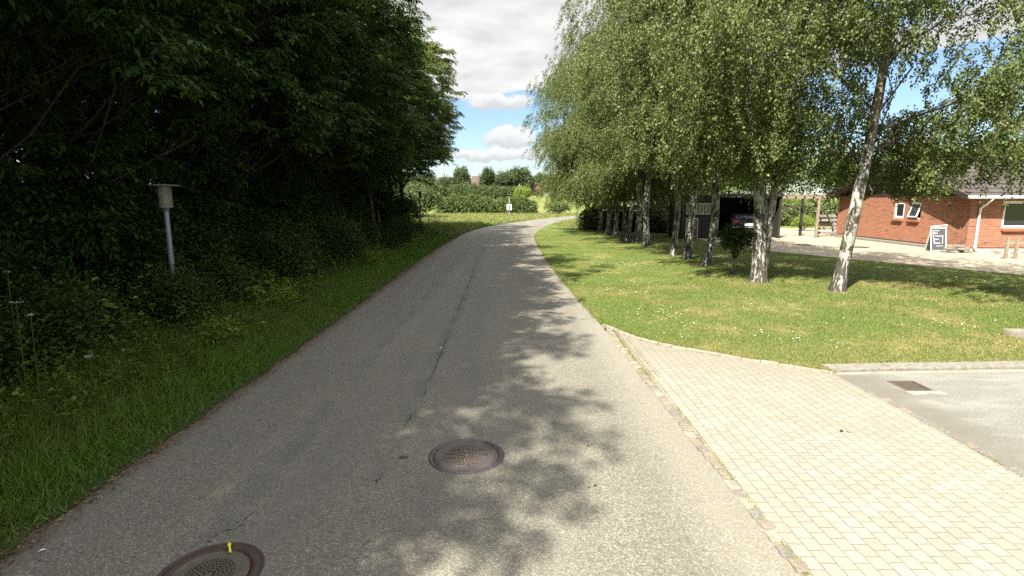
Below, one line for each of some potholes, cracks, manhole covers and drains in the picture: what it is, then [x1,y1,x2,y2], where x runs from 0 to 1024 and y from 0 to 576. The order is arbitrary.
manhole cover [428,439,505,475]
manhole cover [157,542,265,576]
drain grate [888,381,948,396]
crack [375,337,449,483]
